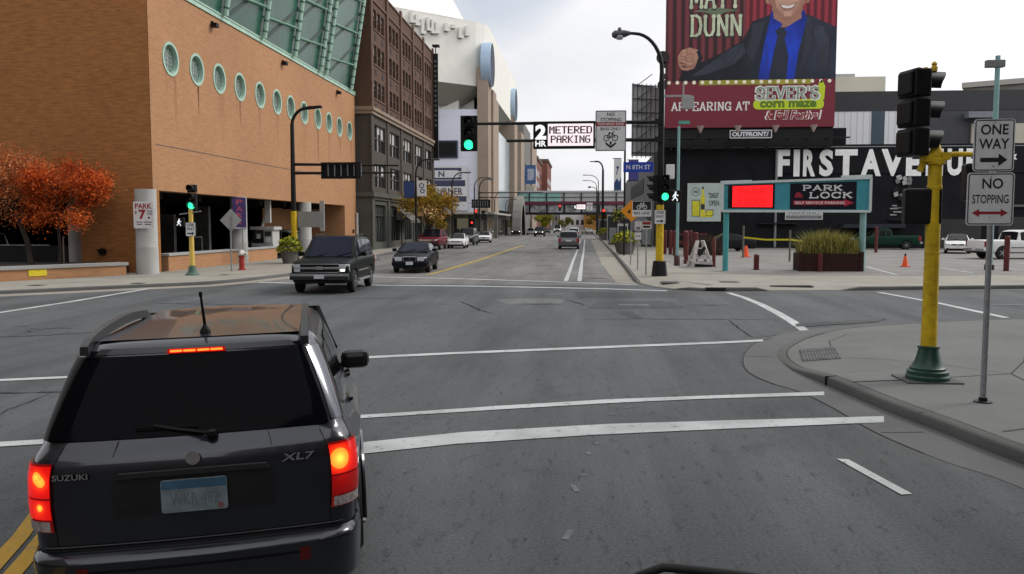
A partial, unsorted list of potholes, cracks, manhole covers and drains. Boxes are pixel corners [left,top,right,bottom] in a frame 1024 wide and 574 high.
crack [0,391,61,415]
